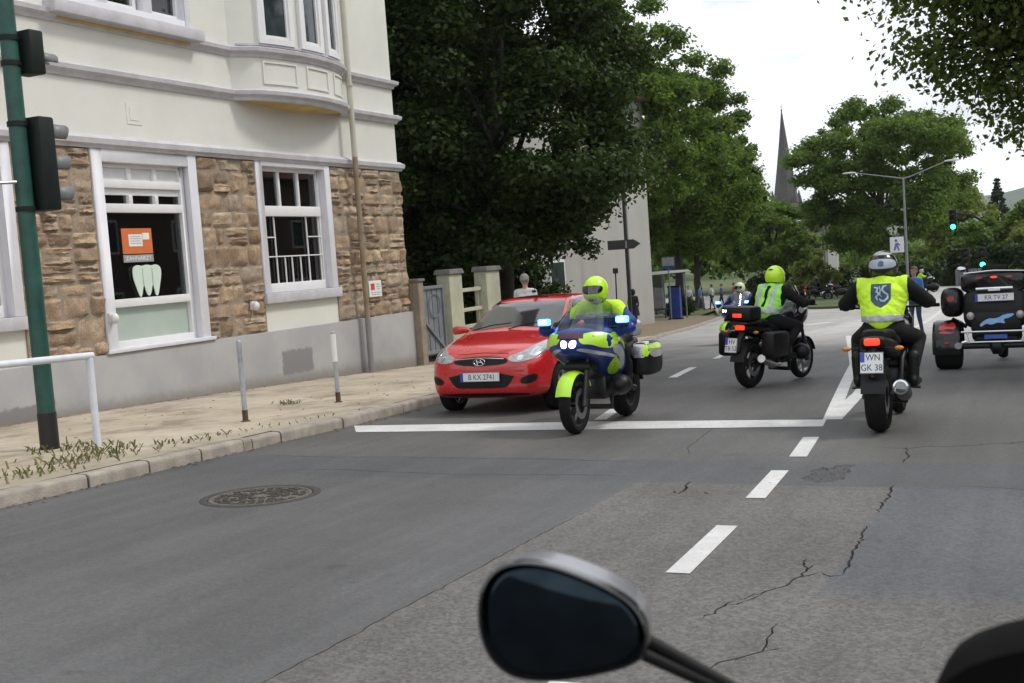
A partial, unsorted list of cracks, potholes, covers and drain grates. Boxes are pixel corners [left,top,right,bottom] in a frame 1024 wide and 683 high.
crack [703,485,895,668]
manhole cover [199,484,321,508]
crack [903,441,1023,463]
